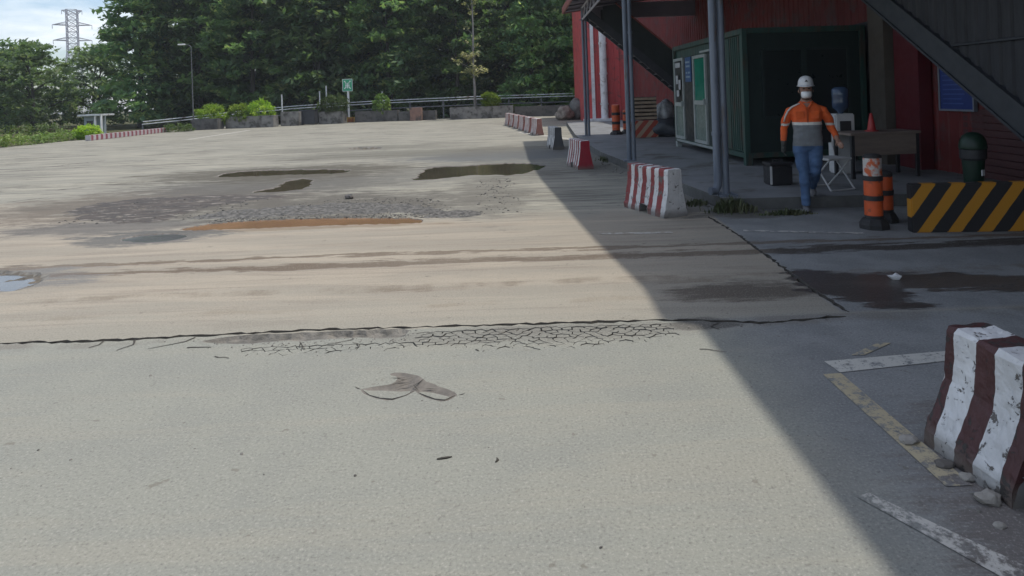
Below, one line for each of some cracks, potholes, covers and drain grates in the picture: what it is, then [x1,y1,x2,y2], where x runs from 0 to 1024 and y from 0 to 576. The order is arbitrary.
pothole [0,270,51,292]
pothole [412,163,548,180]
pothole [252,178,314,193]
crack [215,323,725,358]
pothole [212,168,351,177]
